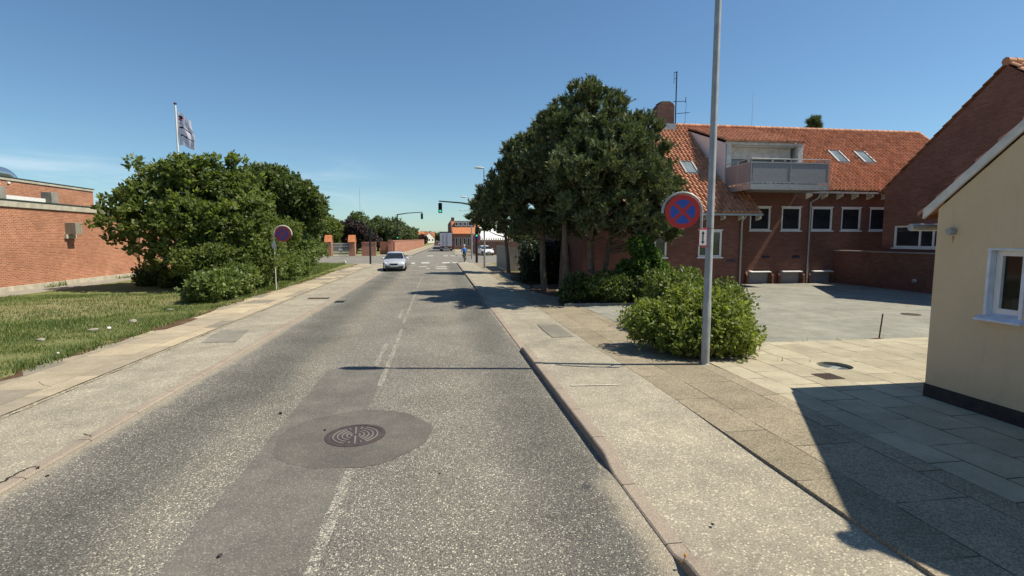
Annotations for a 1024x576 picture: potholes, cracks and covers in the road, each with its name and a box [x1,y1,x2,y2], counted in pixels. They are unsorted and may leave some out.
manhole cover [324,424,386,447]
